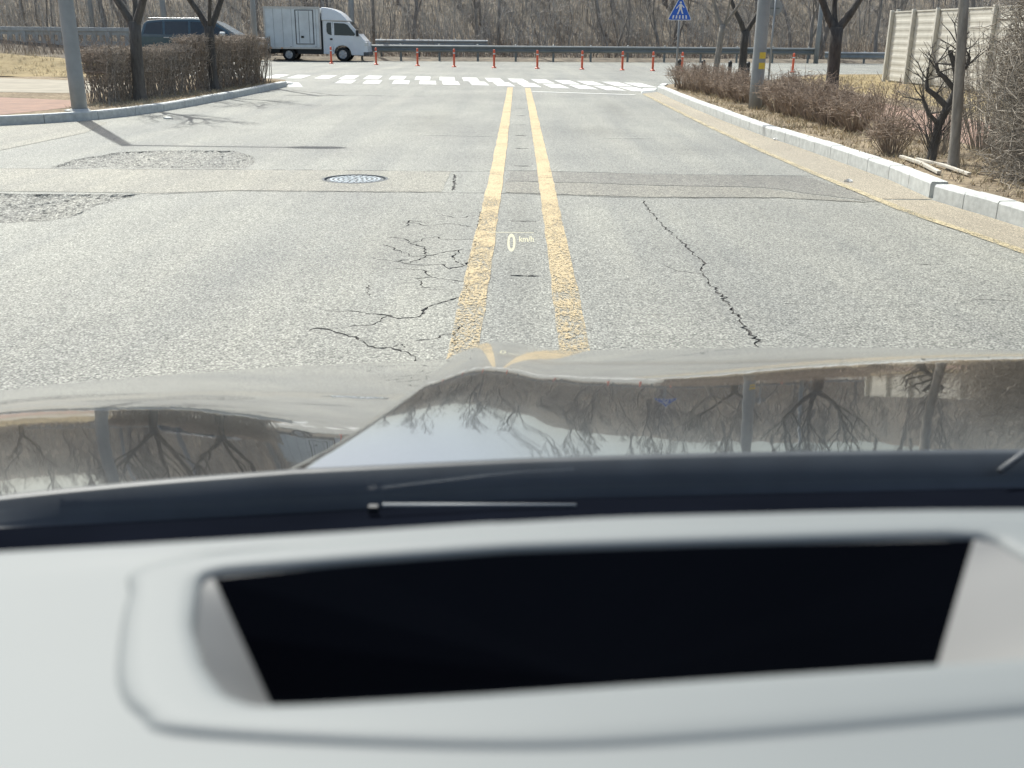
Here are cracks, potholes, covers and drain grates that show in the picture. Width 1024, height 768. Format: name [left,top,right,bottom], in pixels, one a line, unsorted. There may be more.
manhole cover [322,174,388,183]
crack [643,201,761,347]
crack [309,212,482,361]
